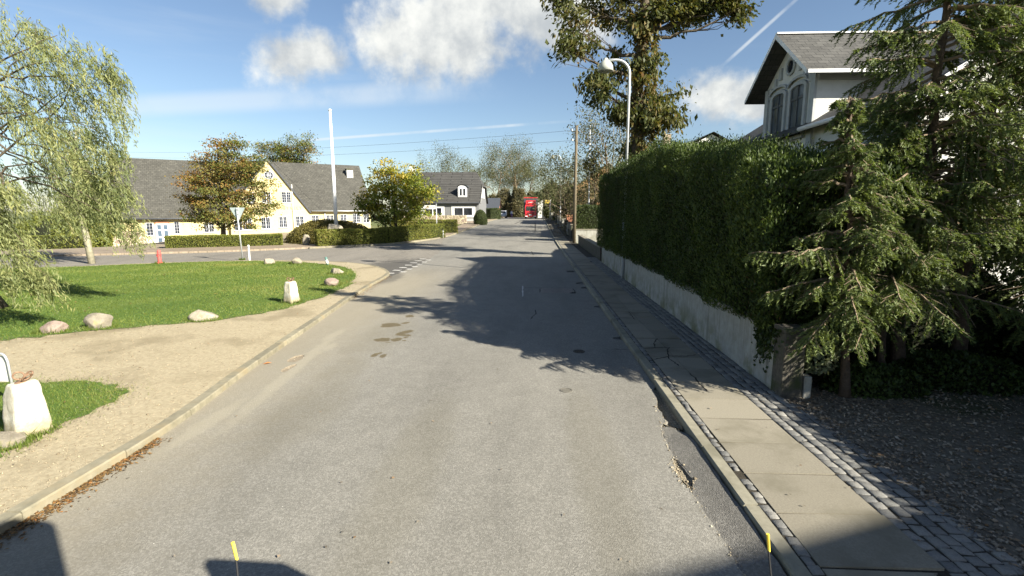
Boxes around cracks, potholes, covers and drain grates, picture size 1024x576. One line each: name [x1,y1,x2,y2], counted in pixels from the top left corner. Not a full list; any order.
pothole [667,457,697,489]
